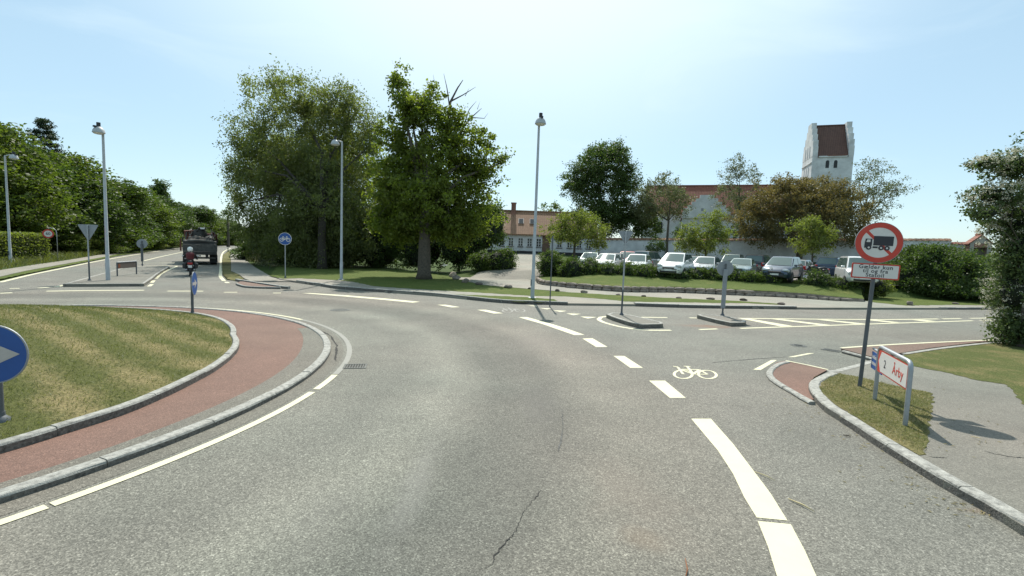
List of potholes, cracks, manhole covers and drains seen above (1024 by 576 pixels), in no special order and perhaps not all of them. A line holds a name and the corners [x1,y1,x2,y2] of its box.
crack [484,489,541,569]
crack [322,331,338,360]
